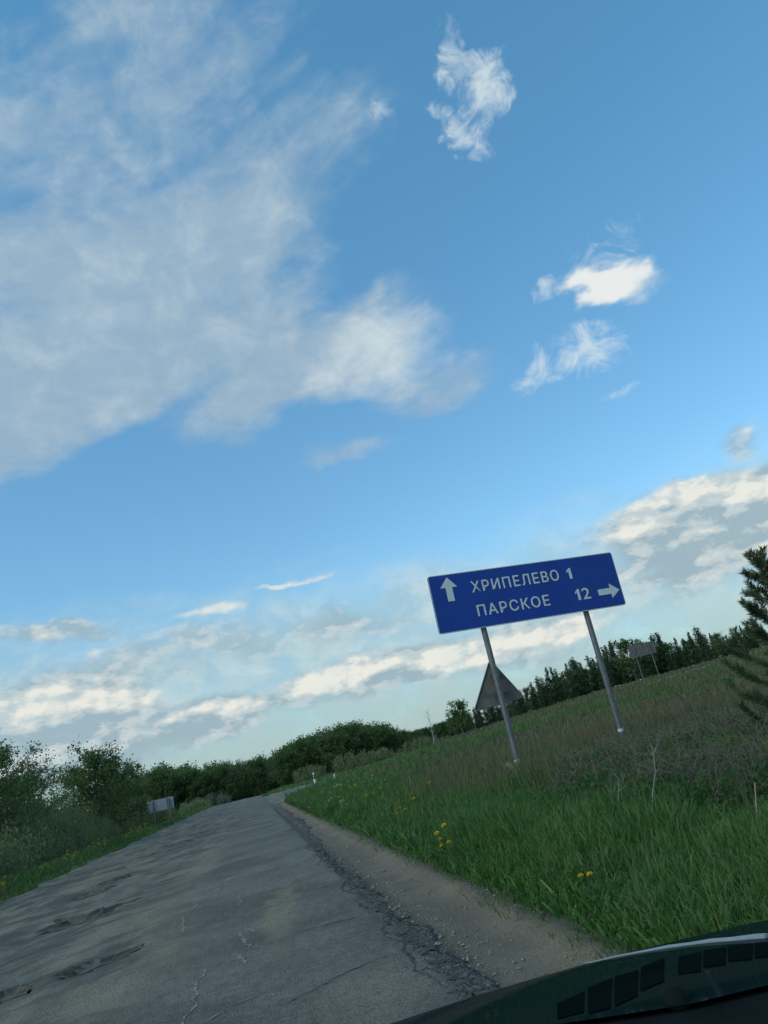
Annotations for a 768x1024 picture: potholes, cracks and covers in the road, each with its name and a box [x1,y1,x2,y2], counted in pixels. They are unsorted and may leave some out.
pothole [33,896,145,937]
pothole [98,869,154,886]
crack [284,842,488,1005]
pothole [52,943,145,979]
pothole [0,983,34,1004]
crack [181,929,262,1024]
